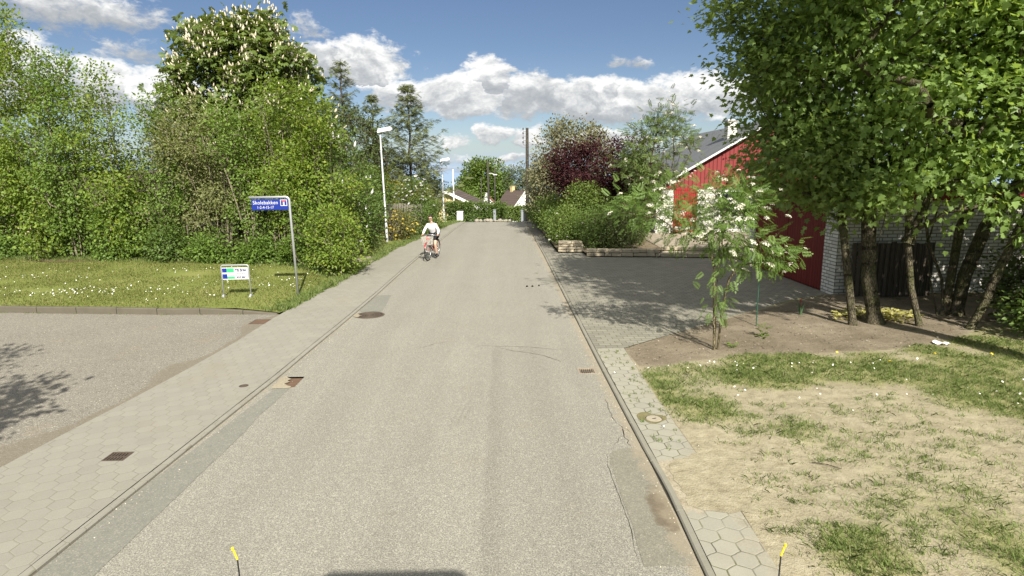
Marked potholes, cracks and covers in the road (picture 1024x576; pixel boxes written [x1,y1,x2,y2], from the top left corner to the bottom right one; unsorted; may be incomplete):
drain grate [101,452,134,461]
